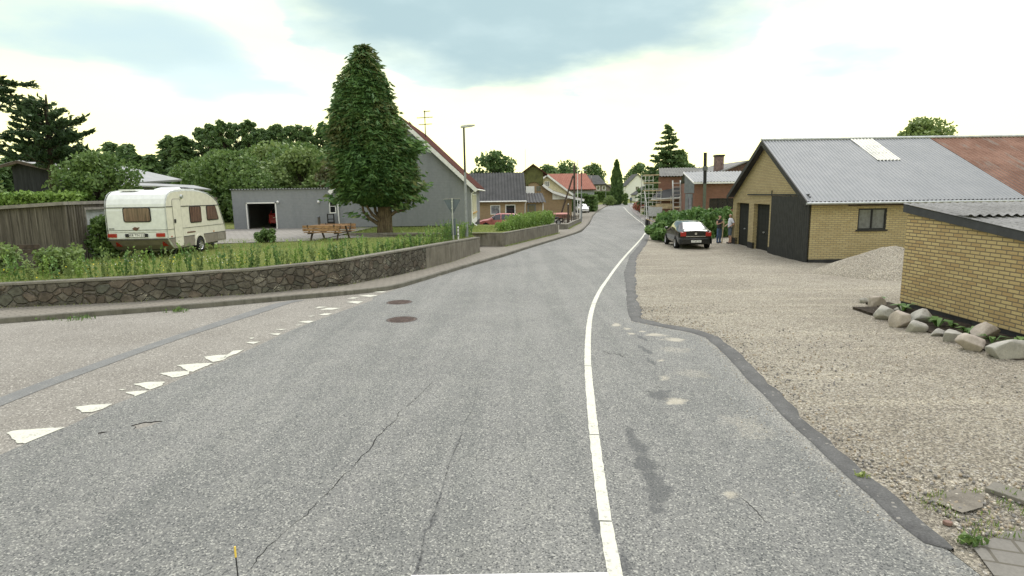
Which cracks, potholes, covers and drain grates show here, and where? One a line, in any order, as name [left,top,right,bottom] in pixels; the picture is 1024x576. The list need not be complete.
crack [251,384,430,569]
